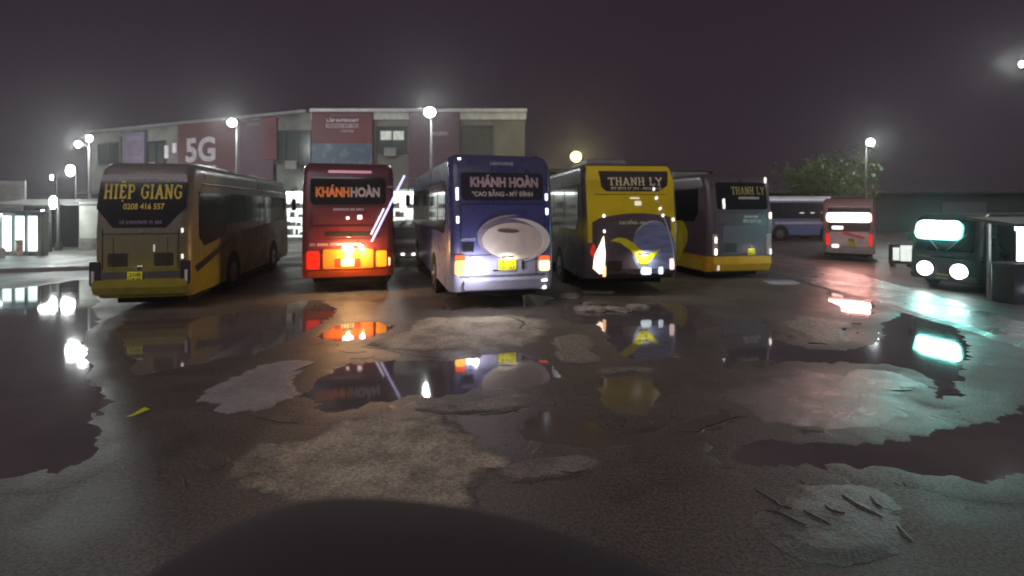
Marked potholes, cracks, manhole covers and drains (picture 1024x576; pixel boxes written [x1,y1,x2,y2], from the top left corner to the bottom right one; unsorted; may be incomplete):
crack [755,489,913,541]
crack [479,313,540,329]
